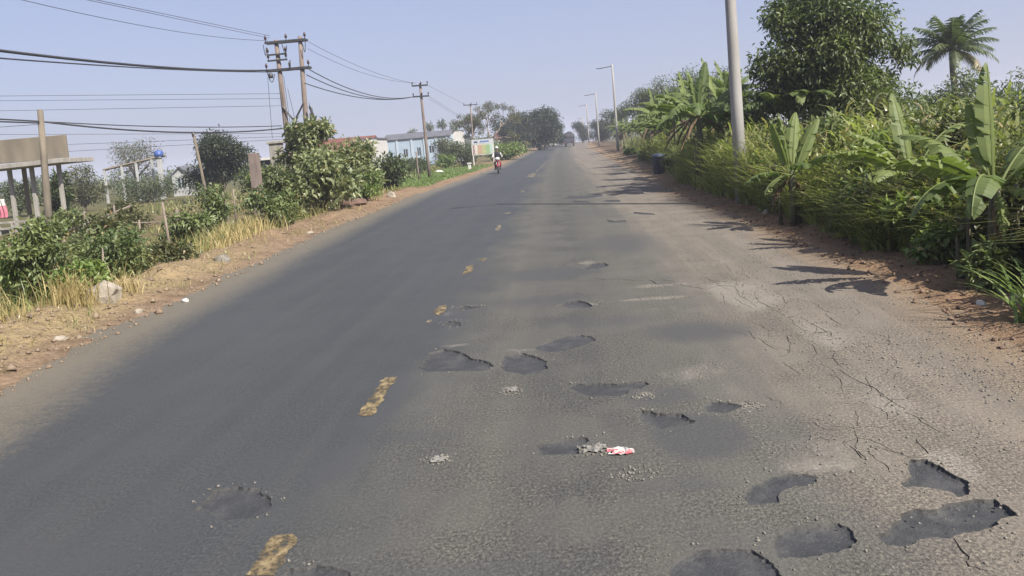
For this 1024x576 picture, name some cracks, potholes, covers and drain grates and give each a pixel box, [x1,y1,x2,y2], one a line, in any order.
pothole [535,335,596,352]
crack [596,258,949,472]
pothole [637,410,695,428]
pothole [772,523,857,558]
pothole [704,402,742,413]
pothole [536,437,589,455]
pothole [900,459,970,497]
pothole [669,548,781,576]
pothole [500,353,548,375]
pothole [195,486,272,521]
pothole [743,474,818,505]
pothole [418,349,494,372]
